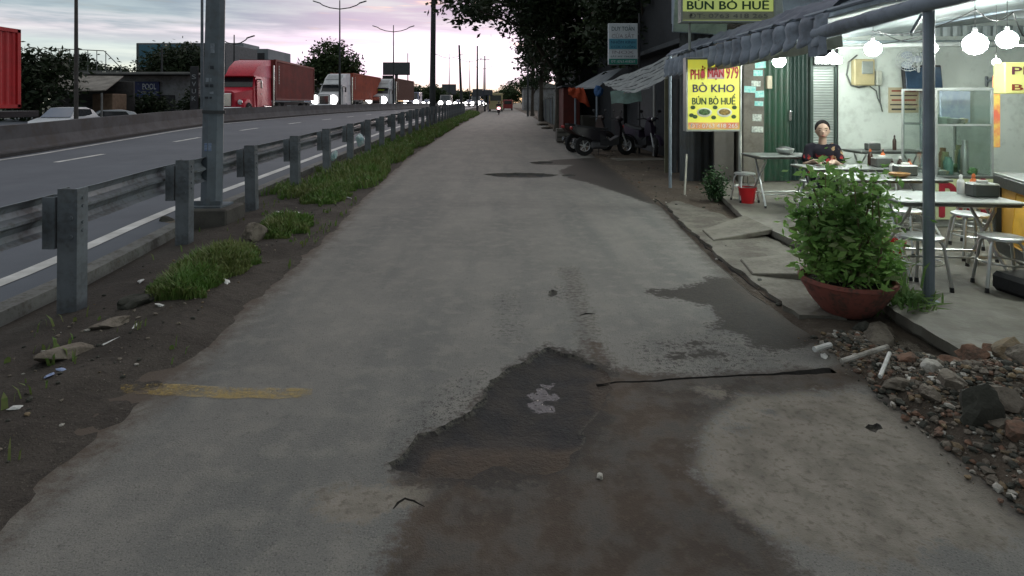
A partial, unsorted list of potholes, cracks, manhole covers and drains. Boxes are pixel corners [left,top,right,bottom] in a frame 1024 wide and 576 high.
crack [596,368,831,387]
pothole [388,347,614,480]
crack [393,498,425,509]
